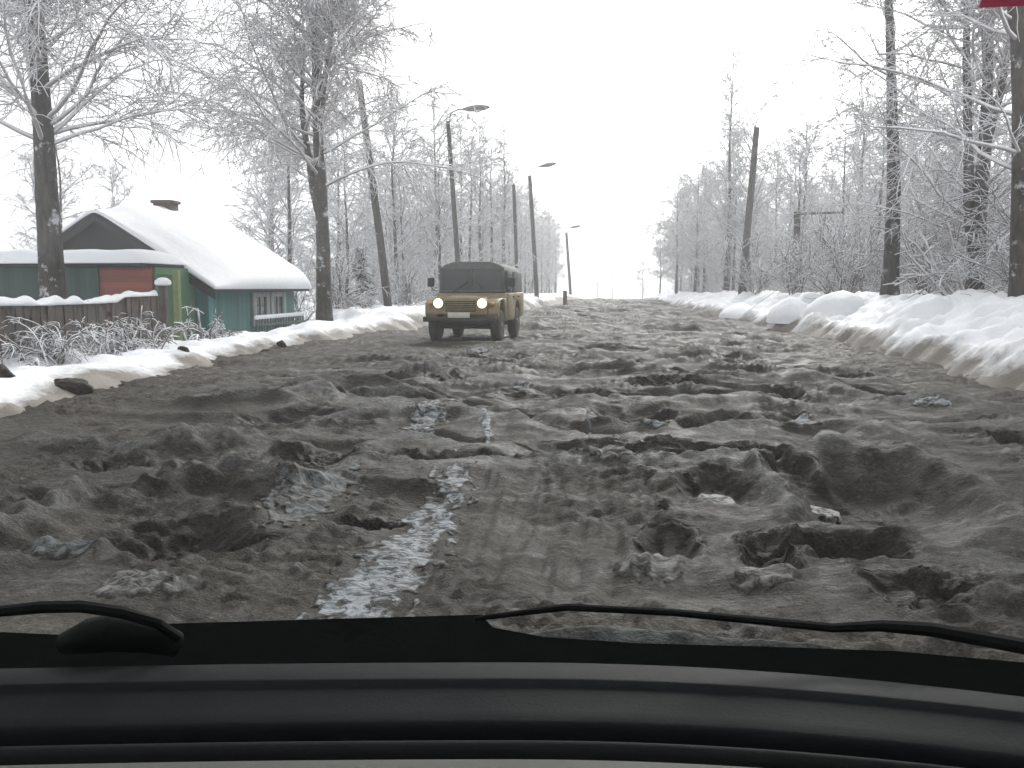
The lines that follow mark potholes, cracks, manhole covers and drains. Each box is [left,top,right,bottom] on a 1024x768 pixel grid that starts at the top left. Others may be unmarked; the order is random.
pothole [61,503,286,569]
pothole [629,519,706,559]
pothole [730,525,808,570]
pothole [774,526,920,561]
pothole [853,566,985,612]
pothole [320,514,405,531]
